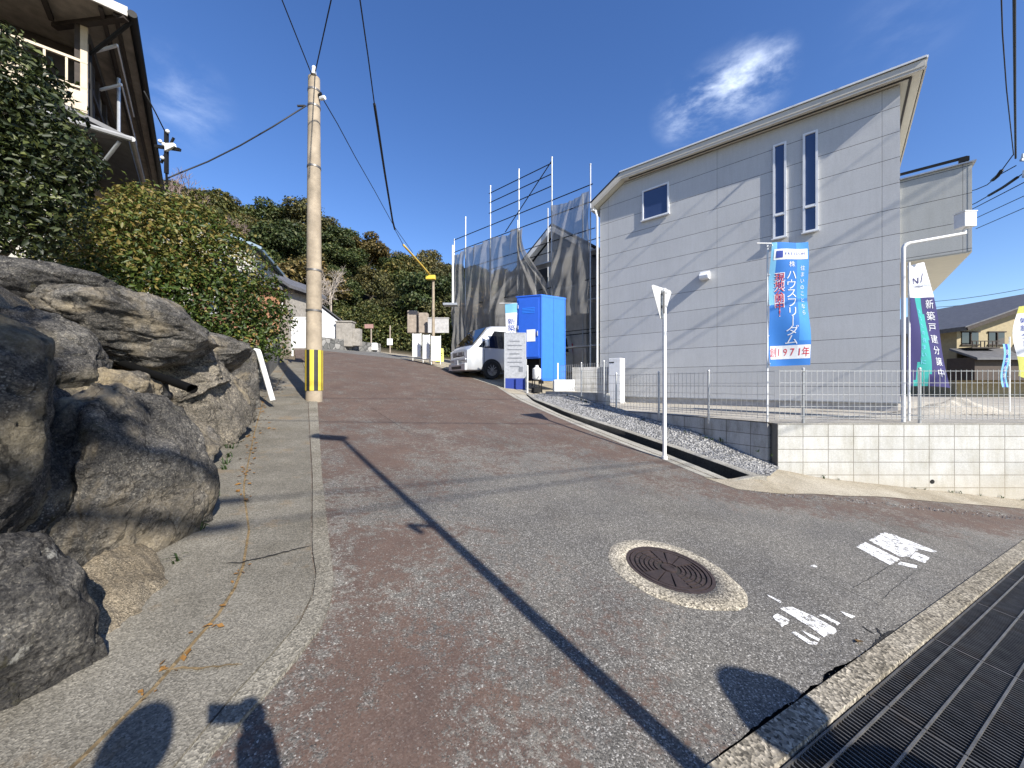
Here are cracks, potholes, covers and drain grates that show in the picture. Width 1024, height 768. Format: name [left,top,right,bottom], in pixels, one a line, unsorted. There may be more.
crack [230,546,308,563]
crack [703,565,912,768]
drain grate [1005,561,1024,583]
drain grate [976,577,1024,621]
manhole cover [608,540,748,611]
drain grate [934,602,1024,681]
drain grate [782,694,983,768]
drain grate [868,638,1024,768]
